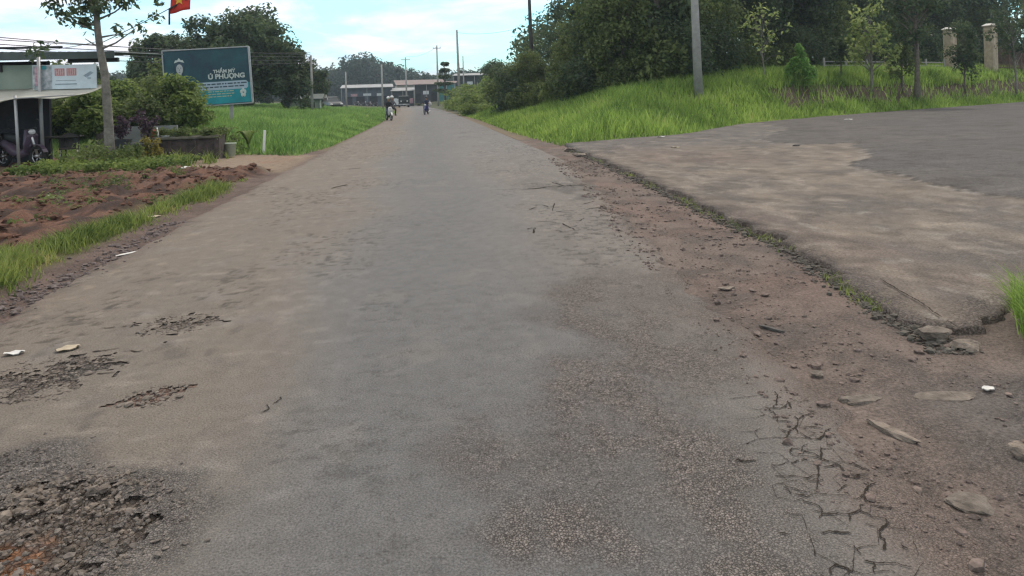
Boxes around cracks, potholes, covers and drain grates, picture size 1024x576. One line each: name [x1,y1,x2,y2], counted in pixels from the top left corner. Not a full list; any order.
crack [880,278,973,336]
pothole [0,352,129,404]
pothole [129,313,231,343]
crack [730,390,923,576]
pothole [99,384,198,408]
pothole [0,480,164,576]
